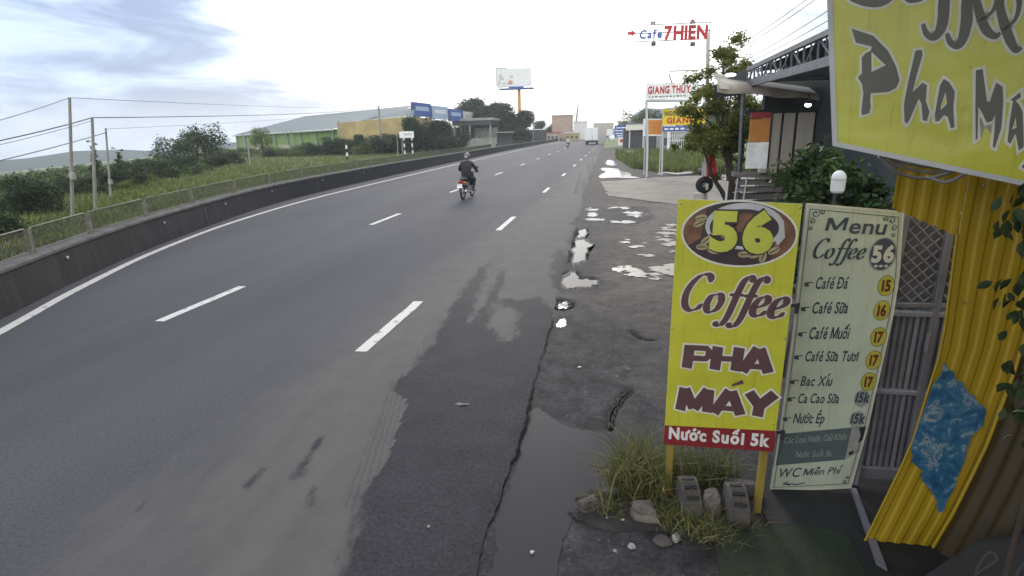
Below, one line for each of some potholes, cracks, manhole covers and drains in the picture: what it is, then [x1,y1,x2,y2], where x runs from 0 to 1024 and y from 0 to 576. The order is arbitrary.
crack [632,331,655,341]
crack [607,390,634,429]
pothole [555,300,574,311]
crack [511,320,553,464]
pothole [570,236,595,266]
pothole [576,228,589,240]
